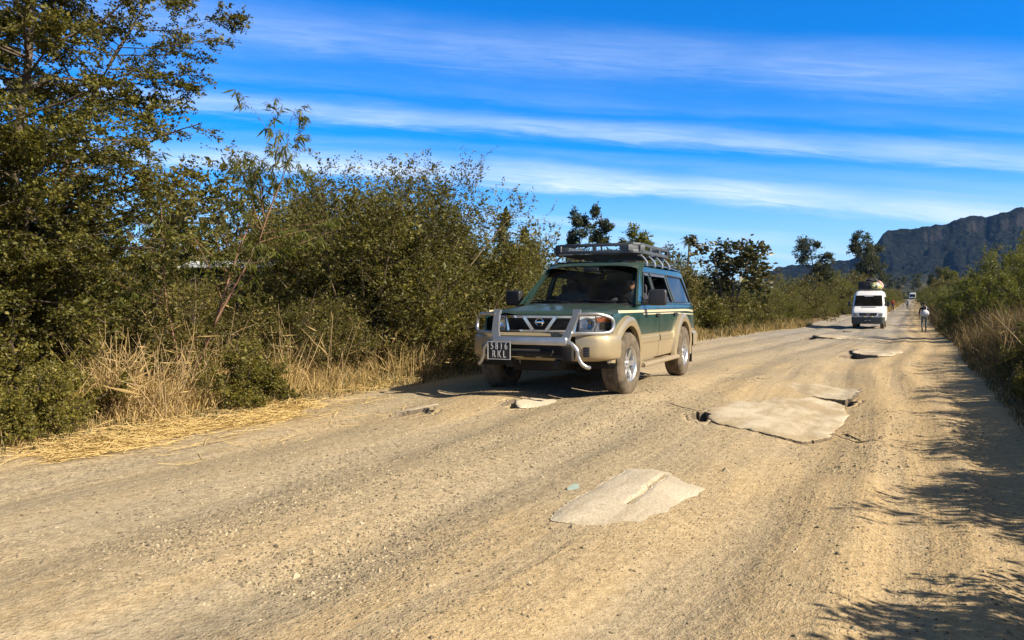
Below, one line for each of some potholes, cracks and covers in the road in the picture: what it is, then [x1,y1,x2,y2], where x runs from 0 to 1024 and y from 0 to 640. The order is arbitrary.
pothole [683,410,711,425]
pothole [384,407,440,420]
